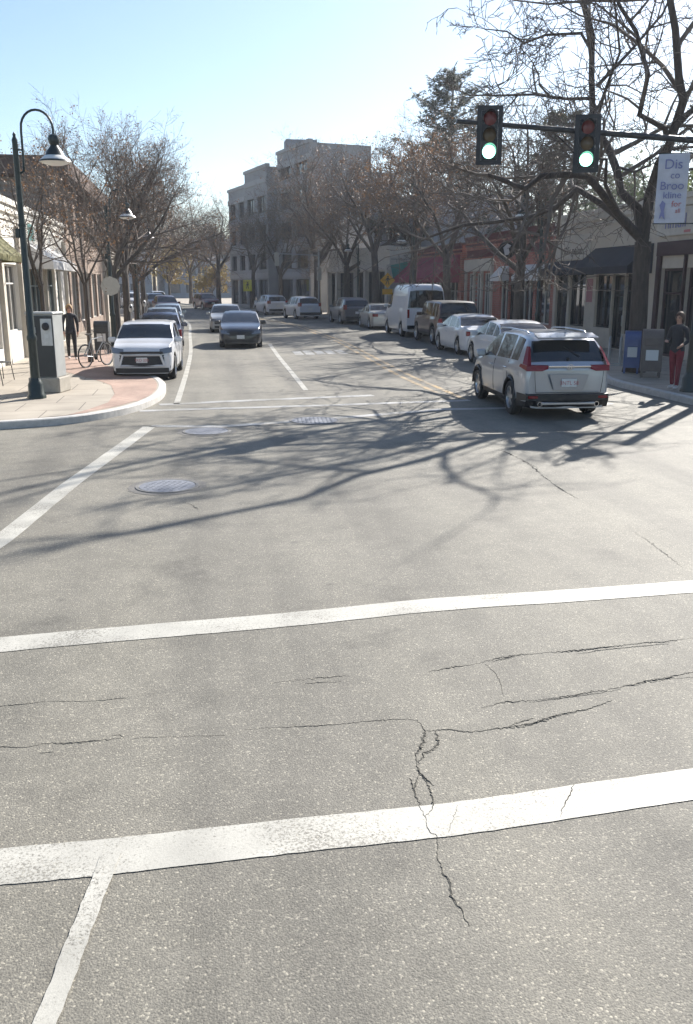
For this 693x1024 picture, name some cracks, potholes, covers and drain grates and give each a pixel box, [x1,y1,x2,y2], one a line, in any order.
manhole cover [176,427,237,436]
manhole cover [283,416,345,425]
crack [0,697,128,707]
crack [245,638,693,925]
manhole cover [127,478,207,495]
crack [0,734,220,753]
crack [498,449,575,498]
